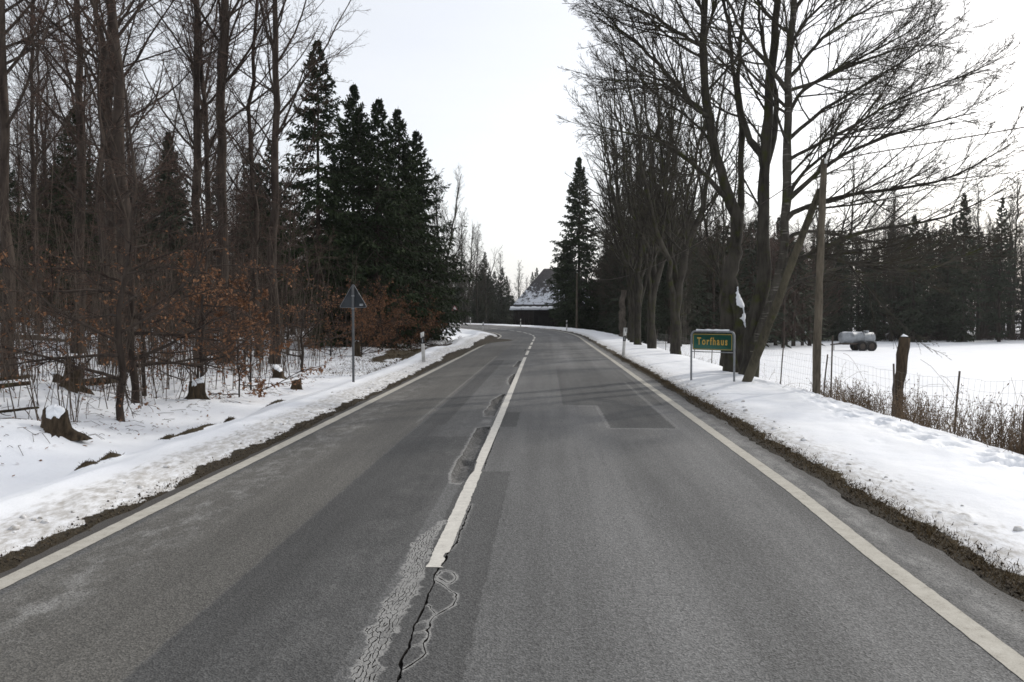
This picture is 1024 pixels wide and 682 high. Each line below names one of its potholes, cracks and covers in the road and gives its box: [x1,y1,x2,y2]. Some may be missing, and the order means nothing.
crack [351,506,471,682]
